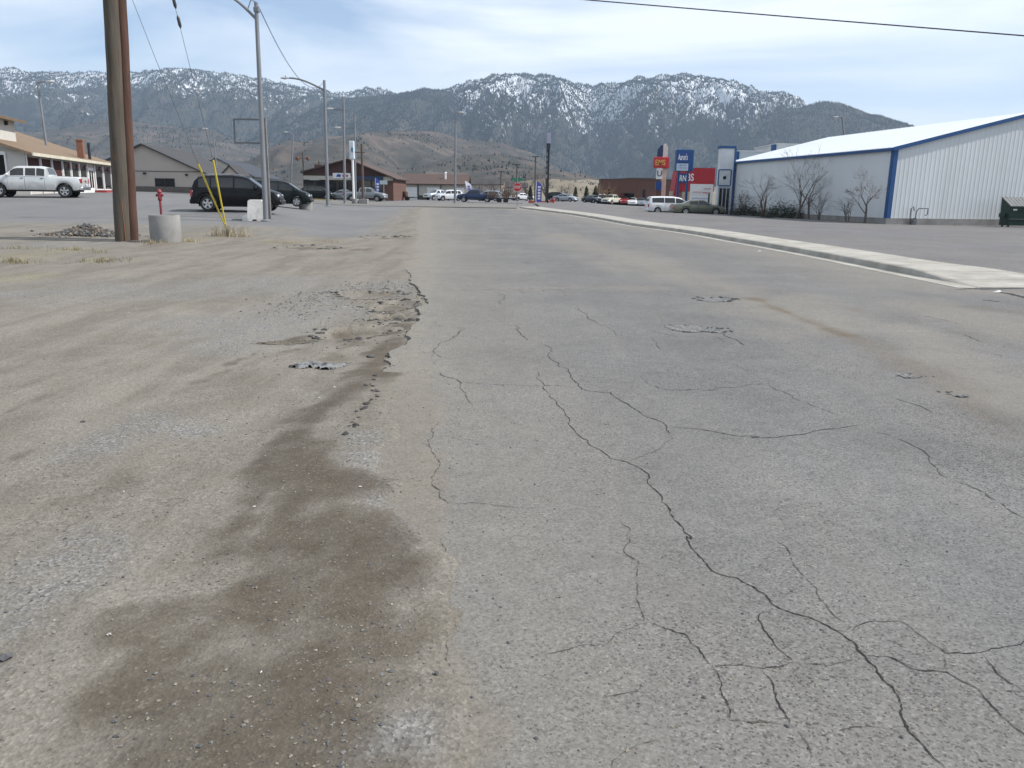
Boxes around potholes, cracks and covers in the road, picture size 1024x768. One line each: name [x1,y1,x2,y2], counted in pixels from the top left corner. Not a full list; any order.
pothole [664,325,733,333]
crack [426,323,1024,767]
pothole [308,288,421,342]
